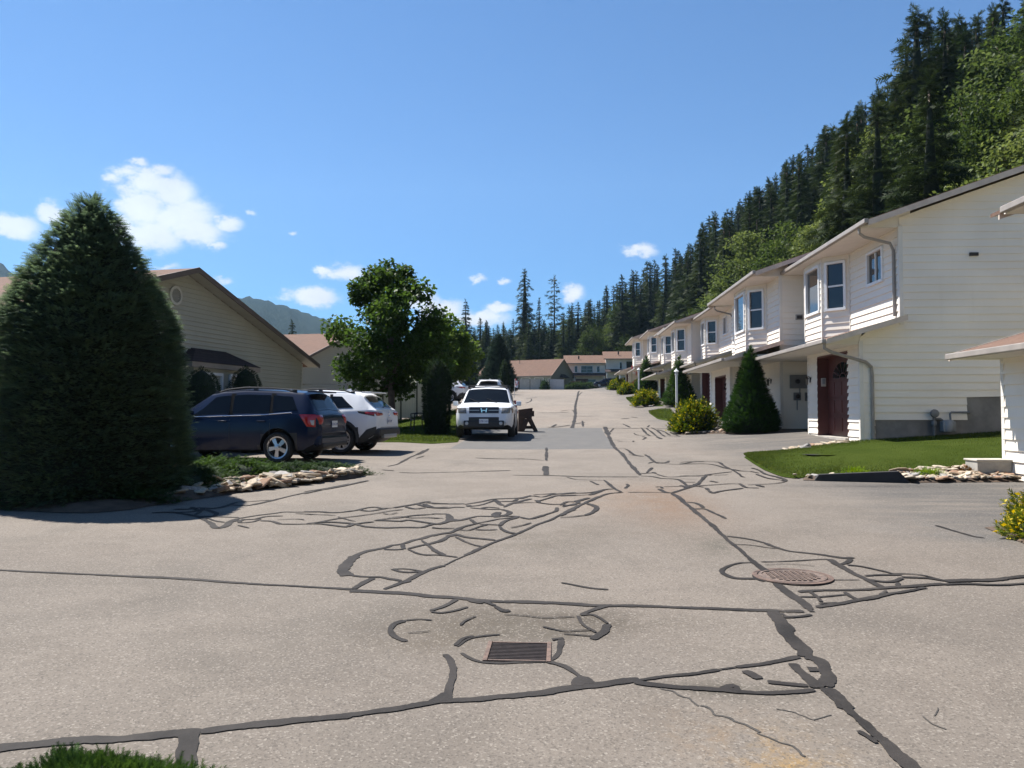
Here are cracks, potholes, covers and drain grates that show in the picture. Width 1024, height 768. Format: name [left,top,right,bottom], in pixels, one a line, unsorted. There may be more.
crack [660,688,830,757]
manhole cover [752,568,834,585]
drain grate [482,641,552,663]
